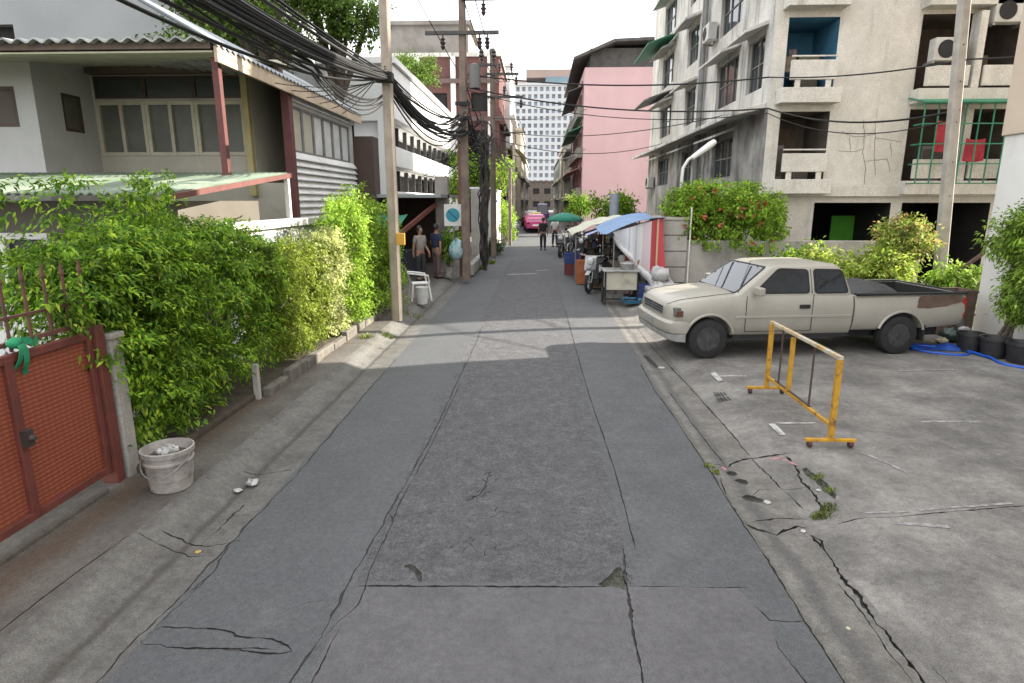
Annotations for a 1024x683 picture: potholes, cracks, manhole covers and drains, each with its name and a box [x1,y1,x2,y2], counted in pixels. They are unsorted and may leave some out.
pothole [598,567,626,590]
pothole [405,564,422,583]
crack [0,311,1020,683]
